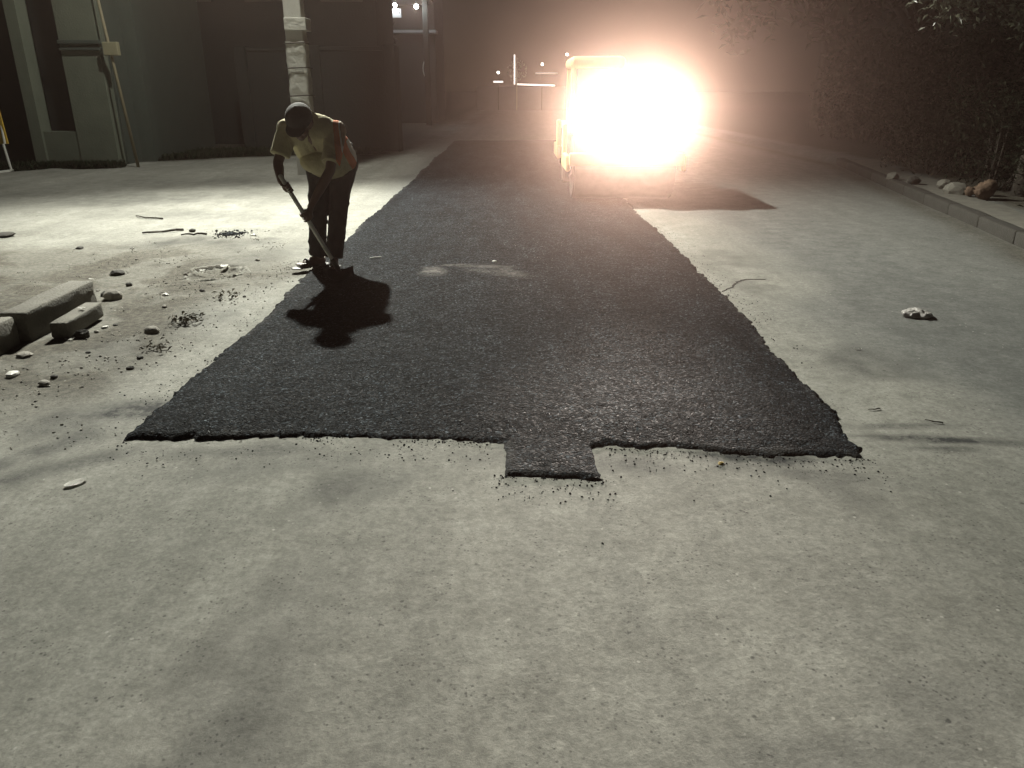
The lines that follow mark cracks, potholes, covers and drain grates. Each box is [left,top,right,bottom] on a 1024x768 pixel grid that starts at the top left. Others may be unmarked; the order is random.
pothole [183,264,251,282]
